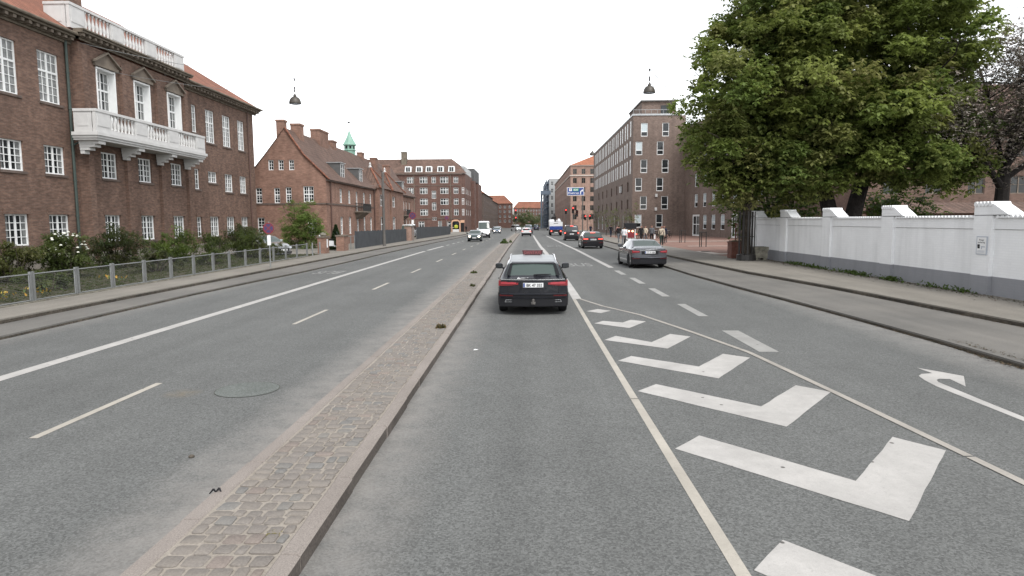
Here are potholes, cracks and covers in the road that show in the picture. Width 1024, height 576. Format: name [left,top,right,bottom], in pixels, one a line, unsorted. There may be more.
manhole cover [214,382,280,397]
